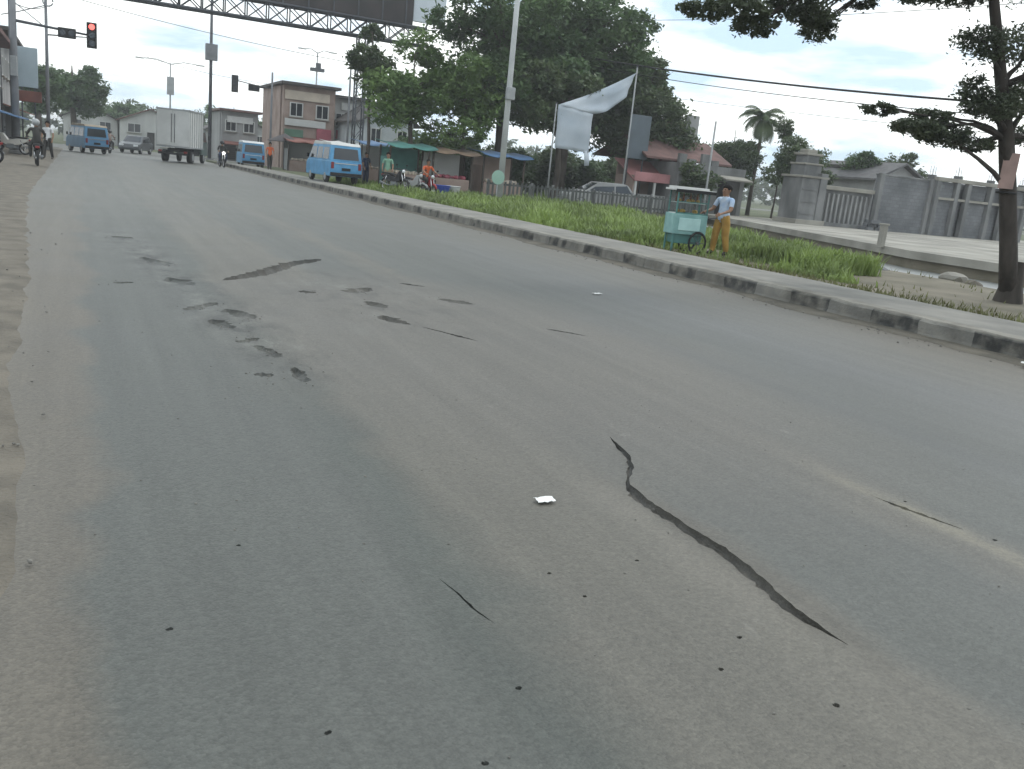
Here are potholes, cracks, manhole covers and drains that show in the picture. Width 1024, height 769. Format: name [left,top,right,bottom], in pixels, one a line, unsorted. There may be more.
pothole [290,367,311,382]
pothole [221,309,257,319]
pothole [163,277,196,286]
pothole [183,302,218,311]
pothole [207,319,236,329]
crack [876,497,961,529]
pothole [377,315,411,325]
crack [440,579,494,623]
pothole [224,259,321,280]
pothole [253,345,282,357]
pothole [139,257,175,266]
